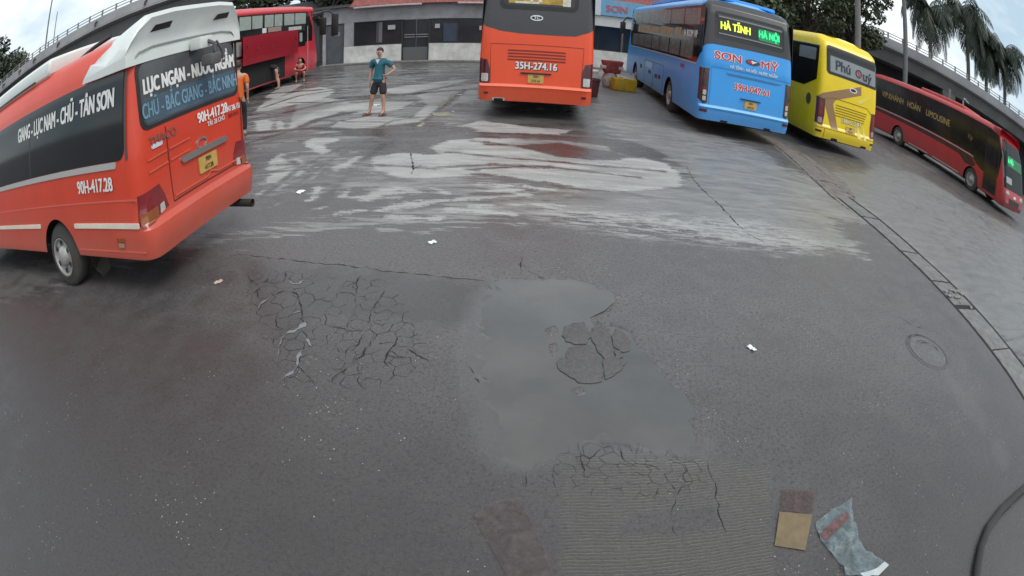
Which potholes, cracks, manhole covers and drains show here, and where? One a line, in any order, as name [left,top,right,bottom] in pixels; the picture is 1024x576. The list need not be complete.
manhole cover [905,334,949,370]
pothole [557,322,630,384]
crack [679,170,762,241]
crack [248,272,427,389]
crack [525,440,727,537]
